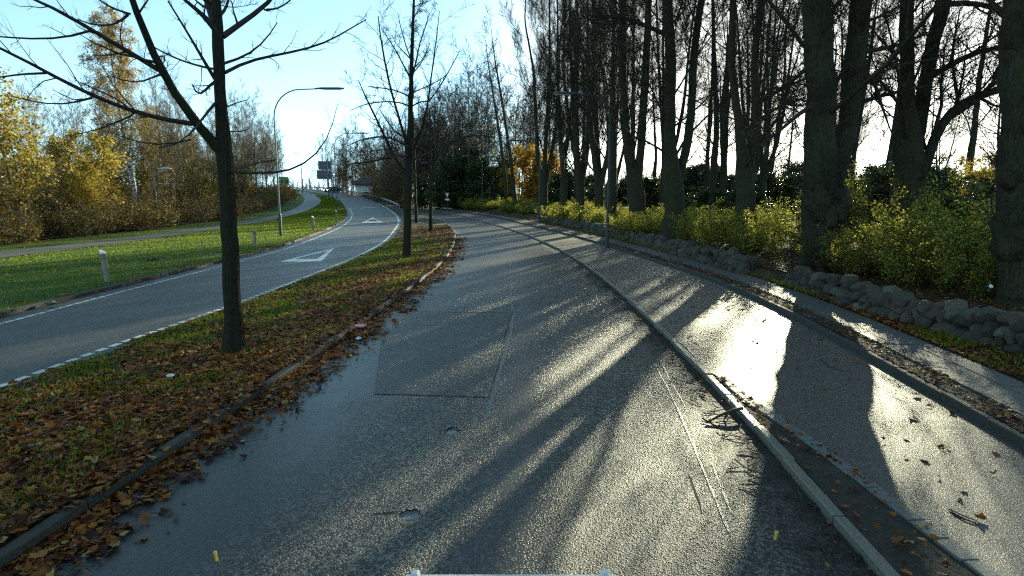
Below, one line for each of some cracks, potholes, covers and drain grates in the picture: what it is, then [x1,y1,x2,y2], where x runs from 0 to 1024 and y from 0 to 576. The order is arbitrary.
pothole [399,509,424,520]
